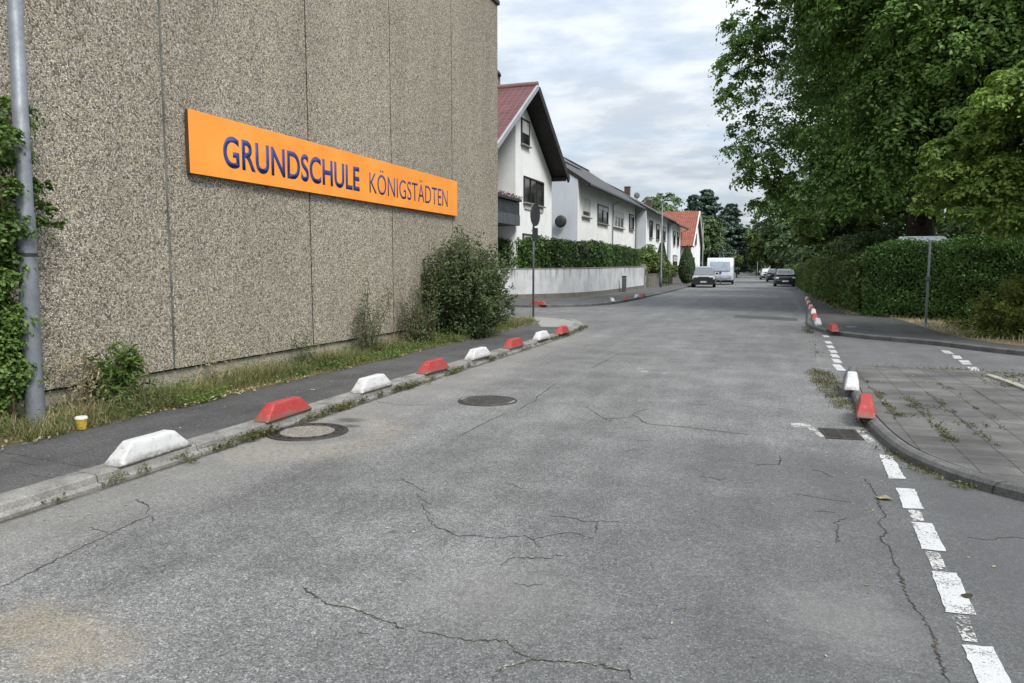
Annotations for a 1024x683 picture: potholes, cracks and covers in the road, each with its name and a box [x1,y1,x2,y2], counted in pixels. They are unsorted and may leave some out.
drain grate [818,428,865,441]
crack [586,407,746,435]
crack [400,478,616,586]
manhole cover [458,395,517,406]
crack [303,587,634,682]
crack [1,499,153,587]
manhole cover [265,423,349,441]
crack [864,478,951,683]
